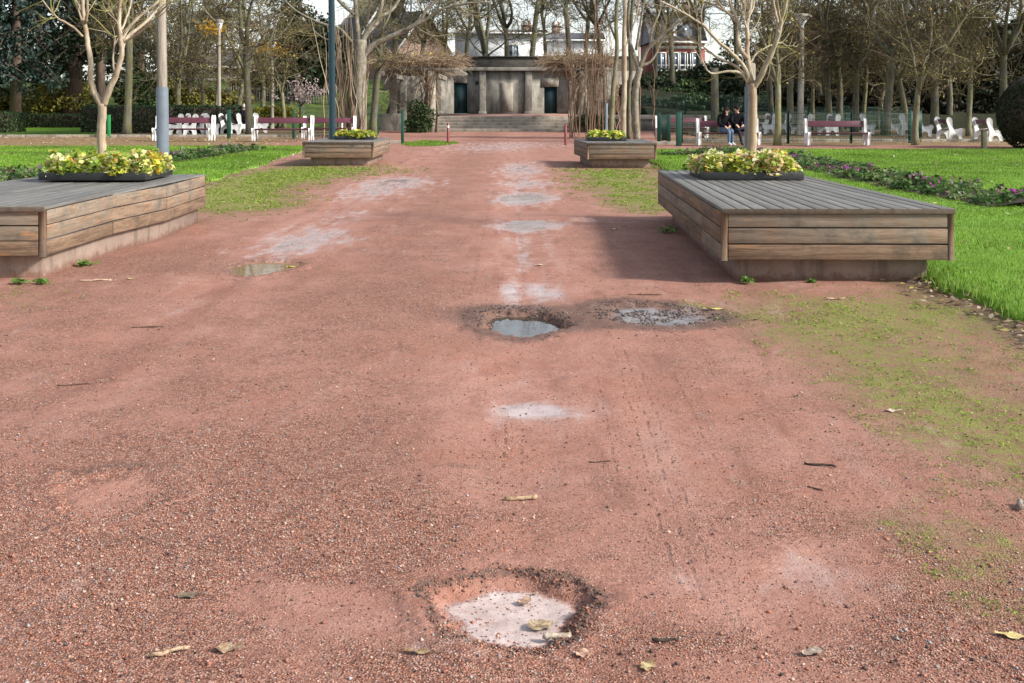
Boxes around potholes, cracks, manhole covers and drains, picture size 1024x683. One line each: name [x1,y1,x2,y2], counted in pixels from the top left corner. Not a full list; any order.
pothole [575,296,760,333]
pothole [374,552,638,671]
pothole [205,256,324,281]
pothole [460,304,591,345]
